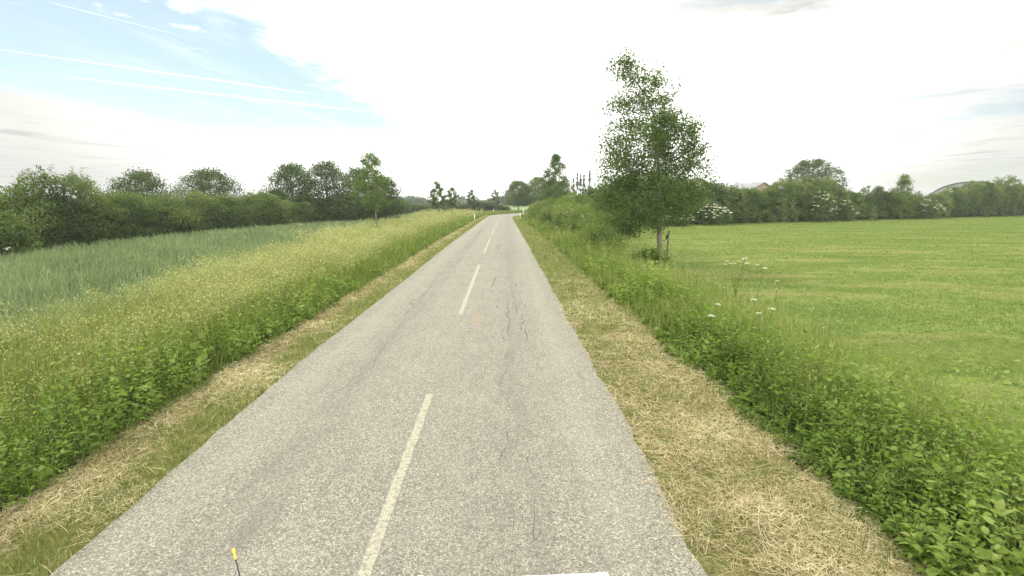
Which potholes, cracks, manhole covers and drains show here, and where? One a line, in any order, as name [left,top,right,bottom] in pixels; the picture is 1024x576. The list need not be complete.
crack [499,353,554,480]
